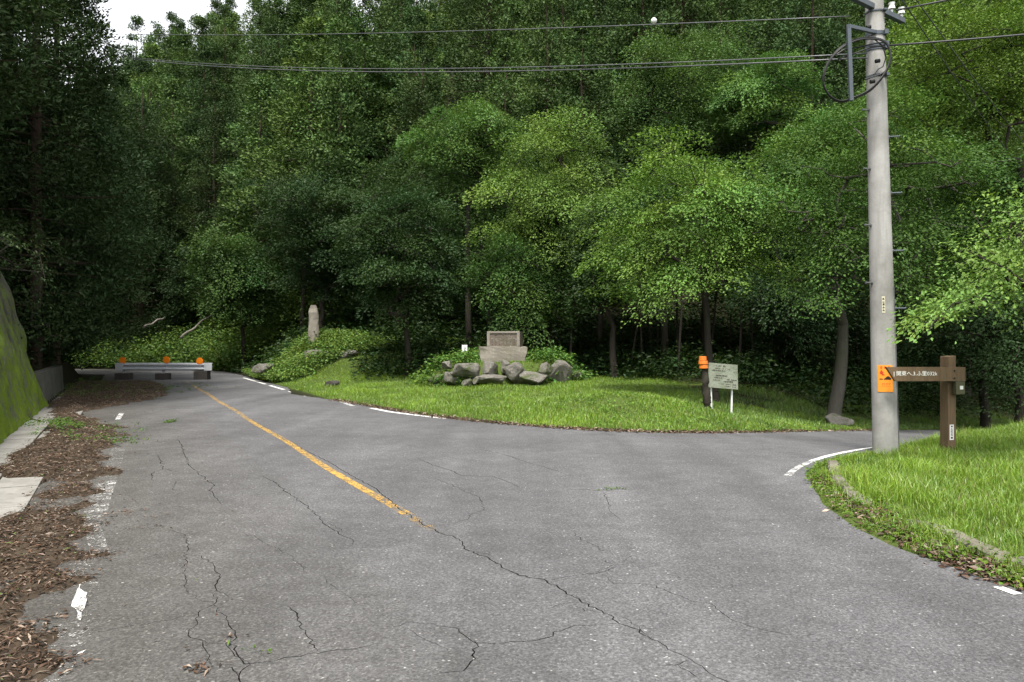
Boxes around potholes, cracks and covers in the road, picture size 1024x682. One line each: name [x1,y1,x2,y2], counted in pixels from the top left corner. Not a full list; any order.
crack [108,535,367,682]
crack [282,438,821,682]
